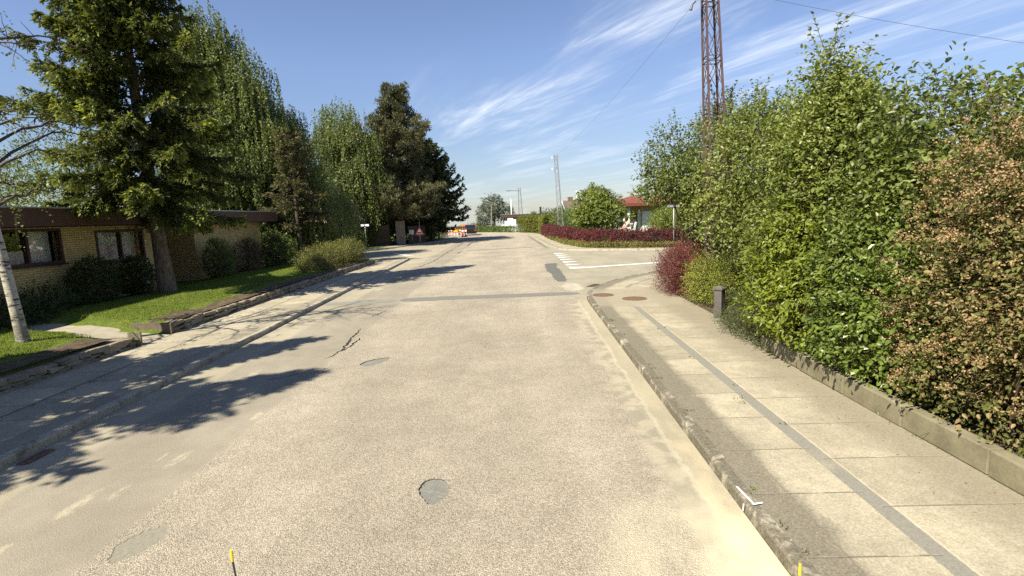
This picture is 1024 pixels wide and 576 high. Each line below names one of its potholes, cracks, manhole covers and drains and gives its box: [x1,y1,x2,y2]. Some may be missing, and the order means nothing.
drain grate [16,449,56,465]
crack [268,310,387,380]
